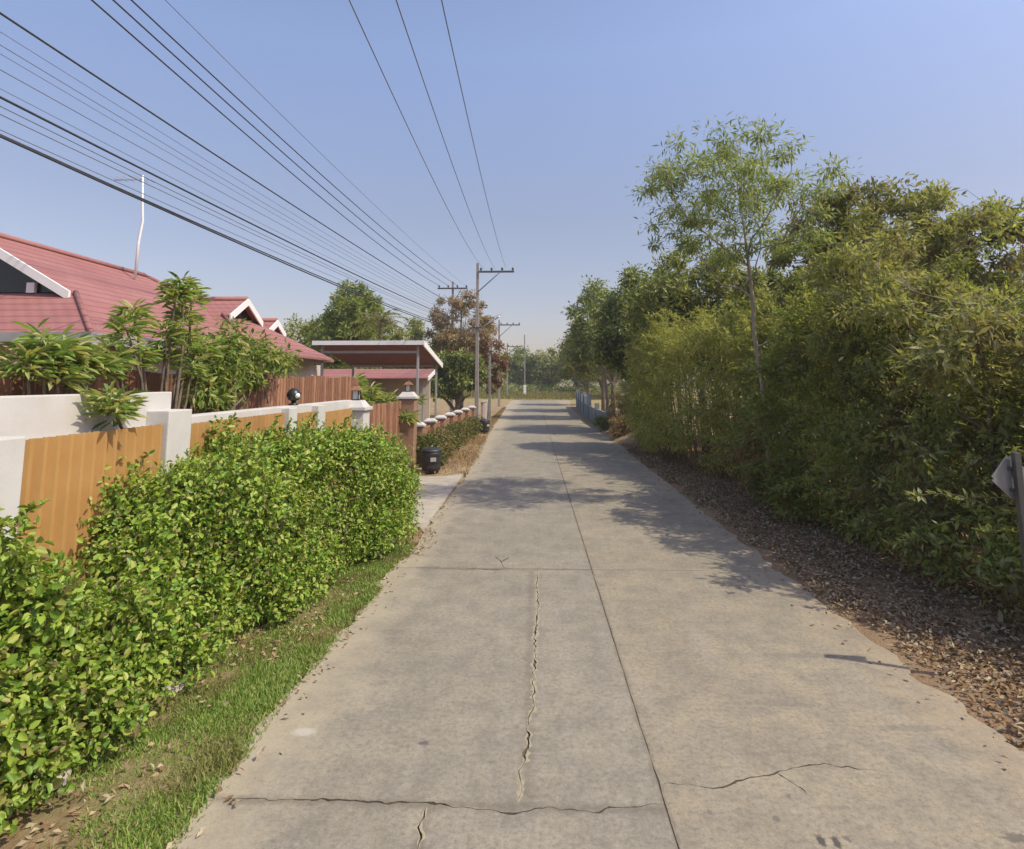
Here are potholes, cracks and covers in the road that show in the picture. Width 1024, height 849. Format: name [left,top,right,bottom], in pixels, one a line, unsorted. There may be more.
crack [672,763,883,793]
crack [221,570,654,849]
